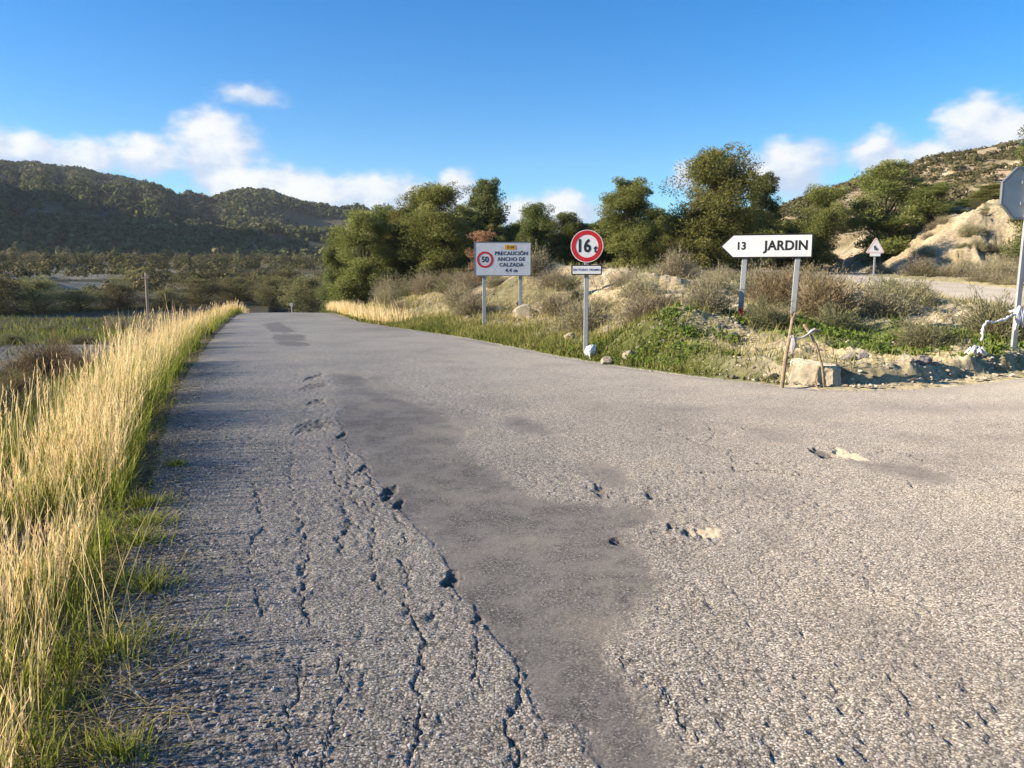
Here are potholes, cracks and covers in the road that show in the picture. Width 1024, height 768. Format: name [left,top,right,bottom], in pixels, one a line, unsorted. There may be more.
pothole [682,523,724,540]
pothole [824,447,870,461]
crack [285,460,312,627]
pothole [808,447,842,459]
pothole [379,484,400,502]
crack [329,439,442,768]
pothole [590,484,614,499]
crack [503,665,524,768]
crack [248,482,266,615]
crack [471,638,486,692]
crack [322,656,354,768]
pothole [440,568,466,588]
